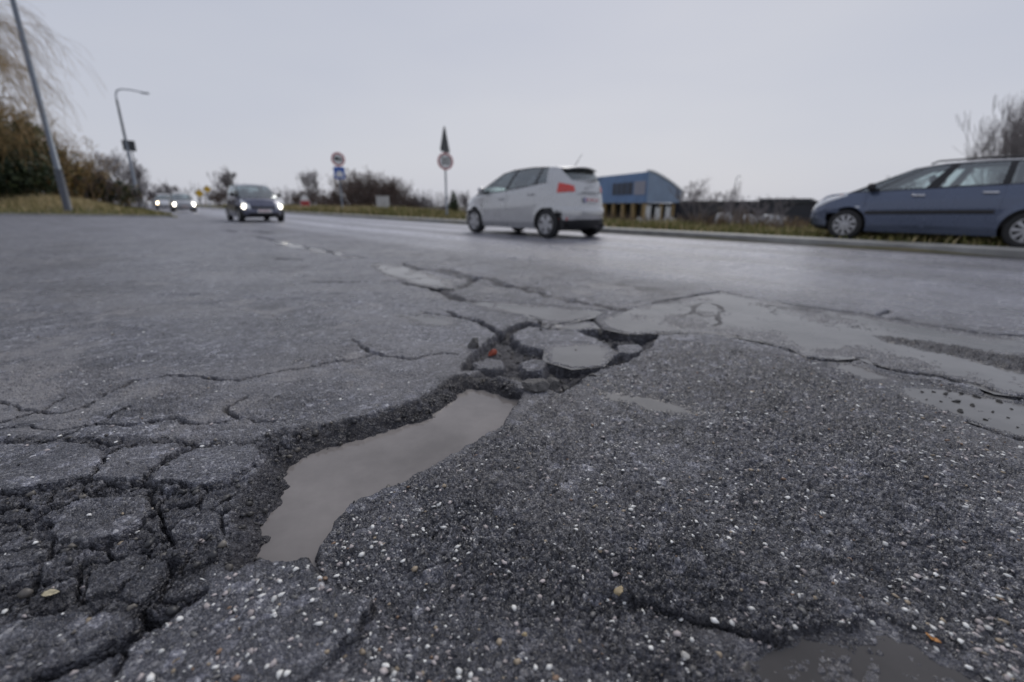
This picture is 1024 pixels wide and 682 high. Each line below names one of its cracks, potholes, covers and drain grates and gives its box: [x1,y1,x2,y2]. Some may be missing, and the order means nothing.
crack [307,263,463,293]
pothole [460,320,659,394]
crack [649,290,1024,402]
crack [0,310,607,682]
pothole [200,372,528,580]
